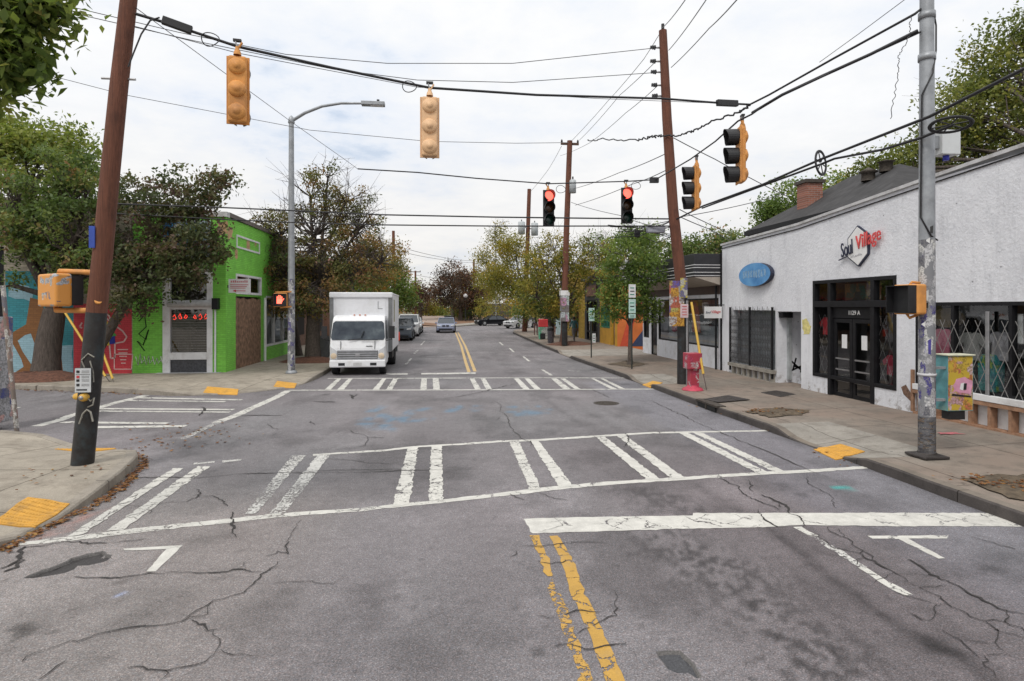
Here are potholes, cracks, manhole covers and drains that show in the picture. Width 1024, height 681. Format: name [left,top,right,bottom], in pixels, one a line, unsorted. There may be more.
crack [718,474,835,527]
crack [22,523,323,679]
crack [815,527,1024,676]
